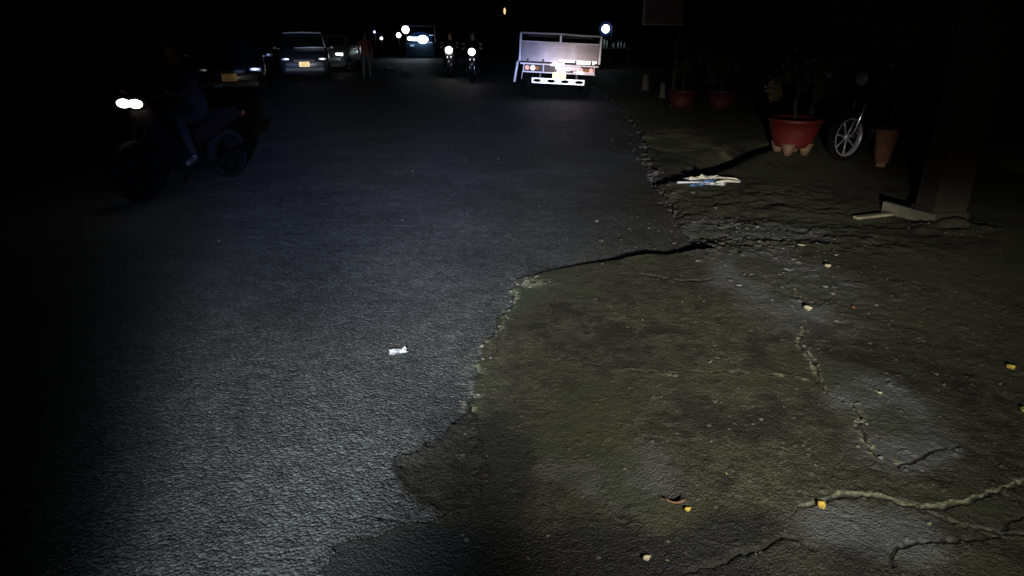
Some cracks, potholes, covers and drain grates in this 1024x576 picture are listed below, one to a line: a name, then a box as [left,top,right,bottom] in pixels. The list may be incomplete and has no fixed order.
crack [798,324,892,462]
crack [897,447,948,468]
crack [513,251,714,282]
crack [791,484,1024,568]
